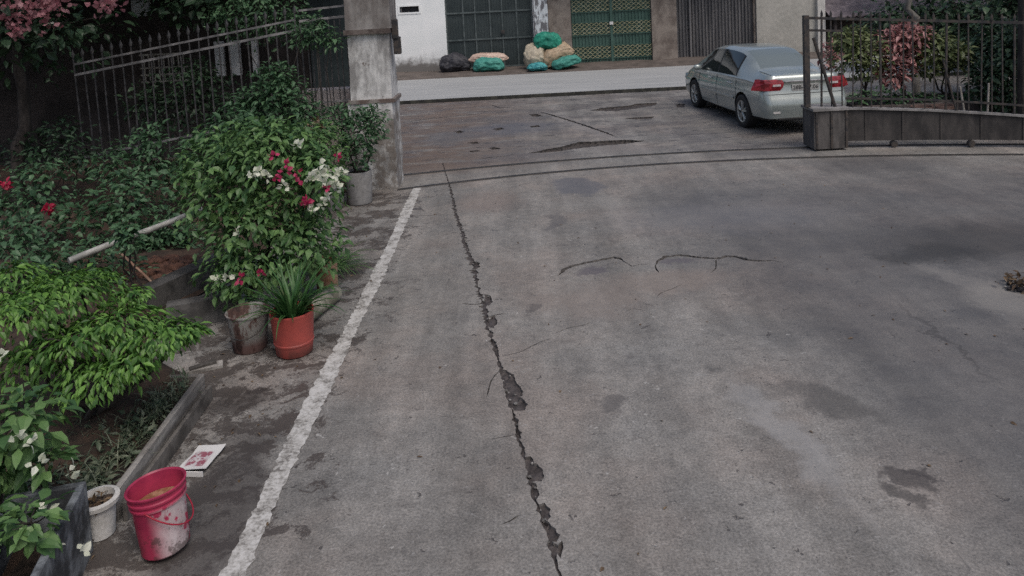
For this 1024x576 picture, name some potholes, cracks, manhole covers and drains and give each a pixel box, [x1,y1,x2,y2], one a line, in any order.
crack [556,254,779,333]
